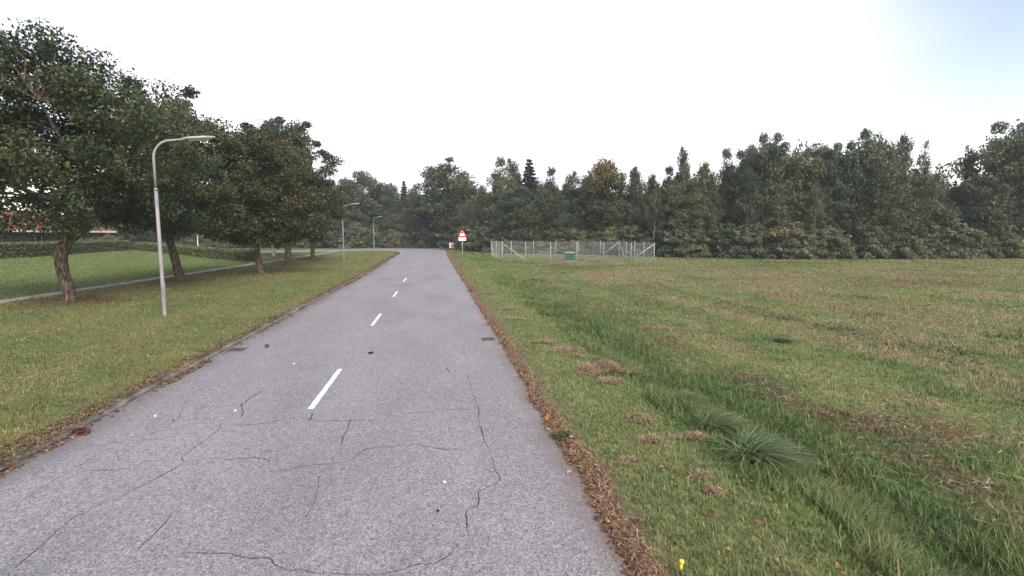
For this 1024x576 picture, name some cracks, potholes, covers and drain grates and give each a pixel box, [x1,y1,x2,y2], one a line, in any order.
crack [1,390,479,569]
